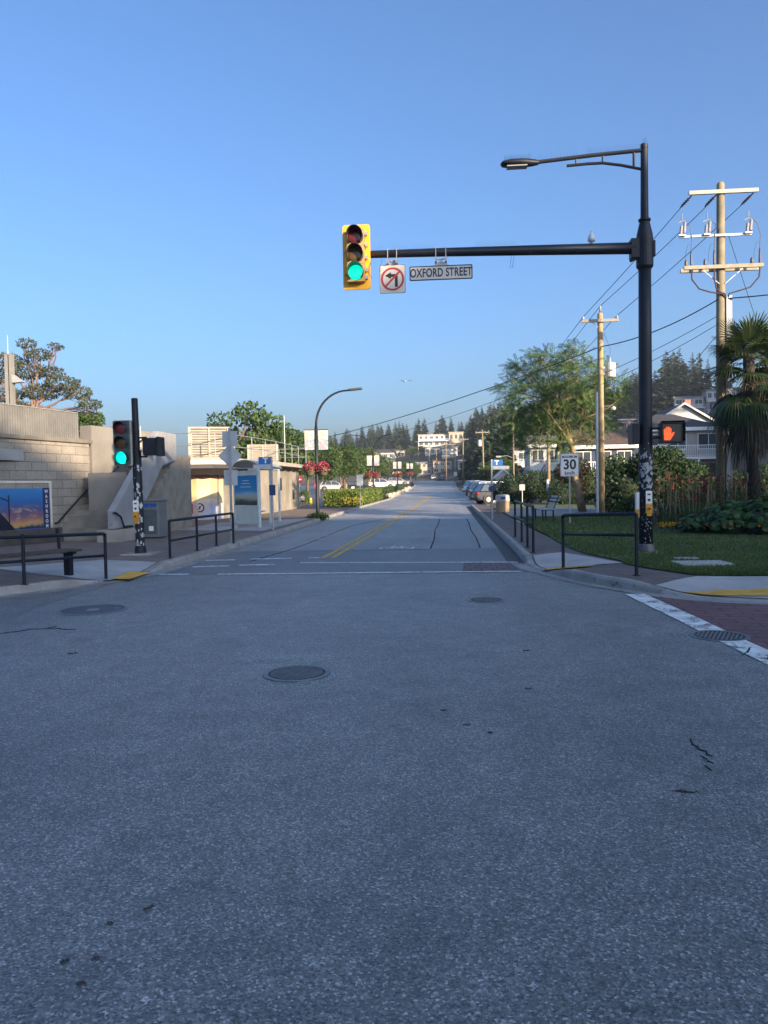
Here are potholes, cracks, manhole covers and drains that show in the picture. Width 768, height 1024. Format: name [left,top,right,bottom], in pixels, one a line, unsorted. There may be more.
crack [0,626,74,634]
manhole cover [56,604,129,616]
manhole cover [262,665,331,682]
crack [690,739,714,771]
